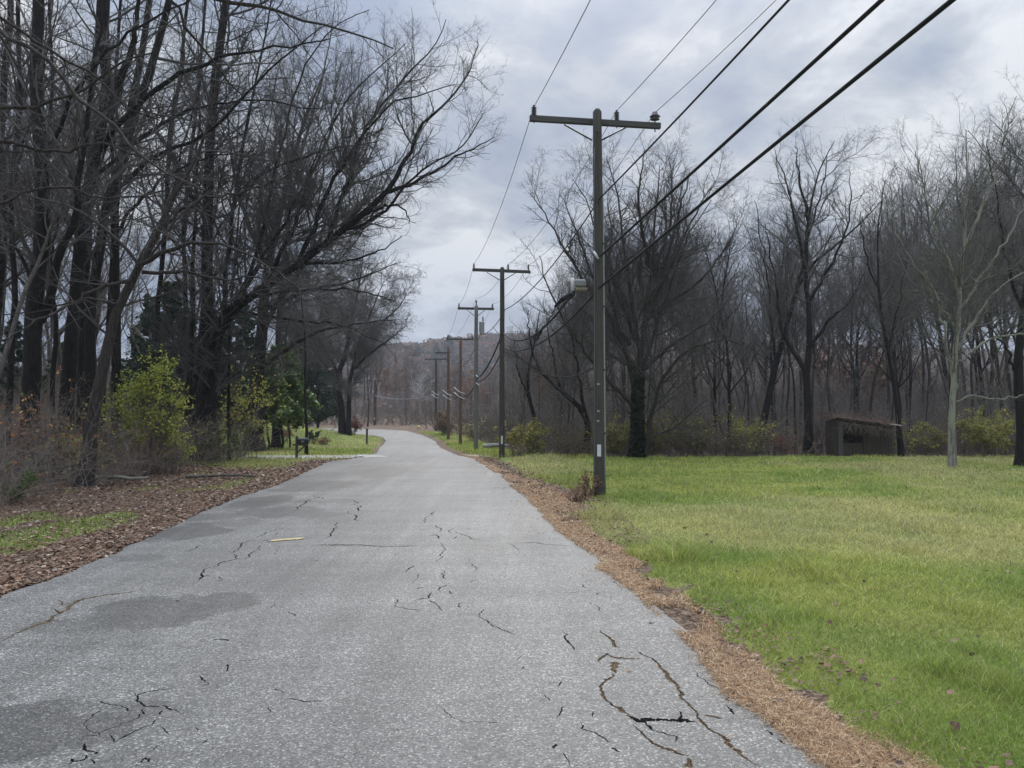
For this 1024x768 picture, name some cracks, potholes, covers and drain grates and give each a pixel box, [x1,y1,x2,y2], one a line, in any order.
crack [581,630,785,768]
crack [198,528,283,582]
crack [394,512,575,669]
crack [1,589,141,642]
crack [296,496,401,547]
crack [69,658,326,765]
